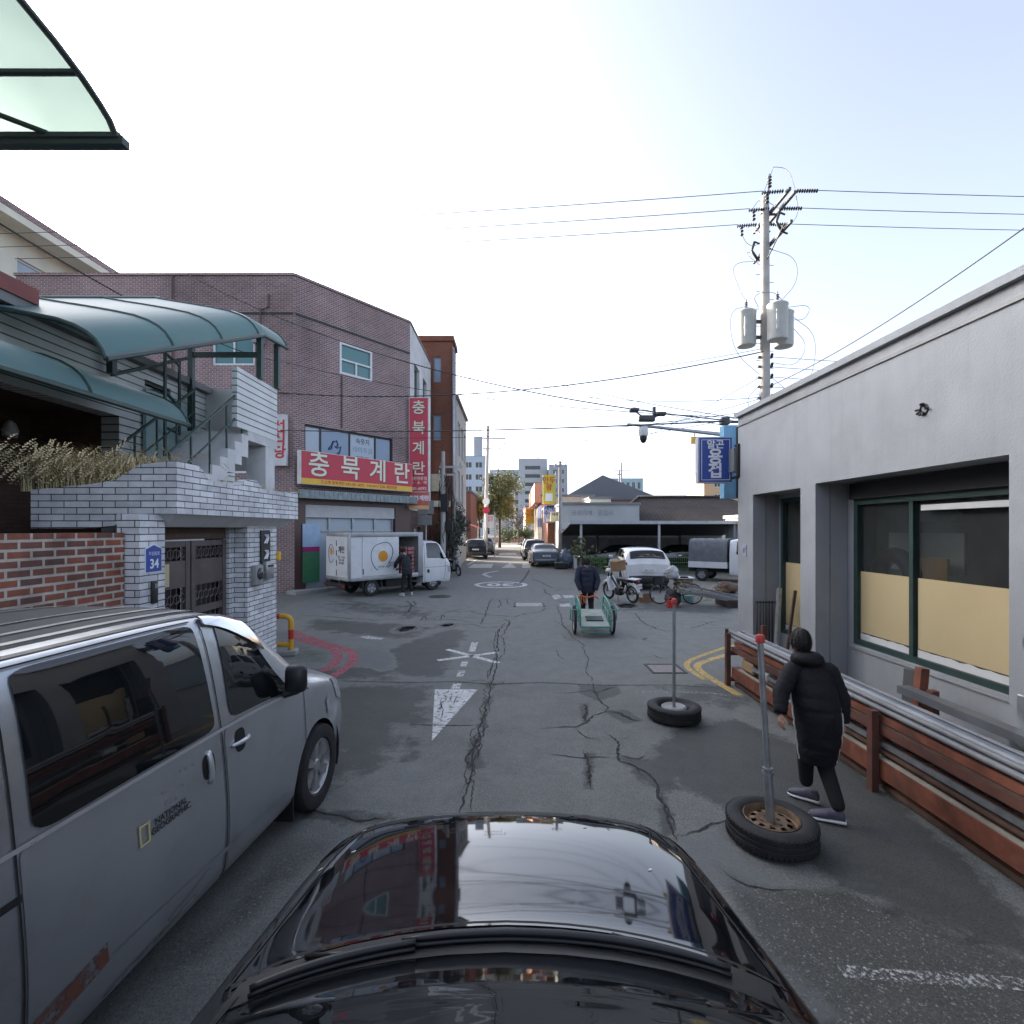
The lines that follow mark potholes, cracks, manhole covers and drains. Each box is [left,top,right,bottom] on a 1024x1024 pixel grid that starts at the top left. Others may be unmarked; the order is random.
crack [396,570,725,841]
manhole cover [644,664,687,673]
crack [312,810,393,822]
